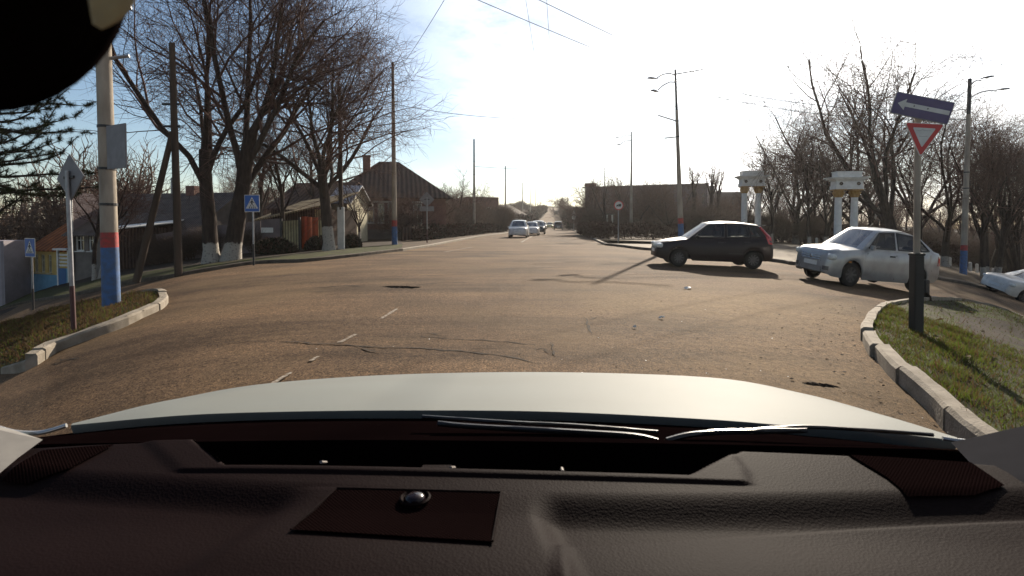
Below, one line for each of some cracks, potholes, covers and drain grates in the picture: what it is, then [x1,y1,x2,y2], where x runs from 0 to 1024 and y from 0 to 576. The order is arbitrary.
pothole [793,379,852,392]
crack [197,331,559,363]
